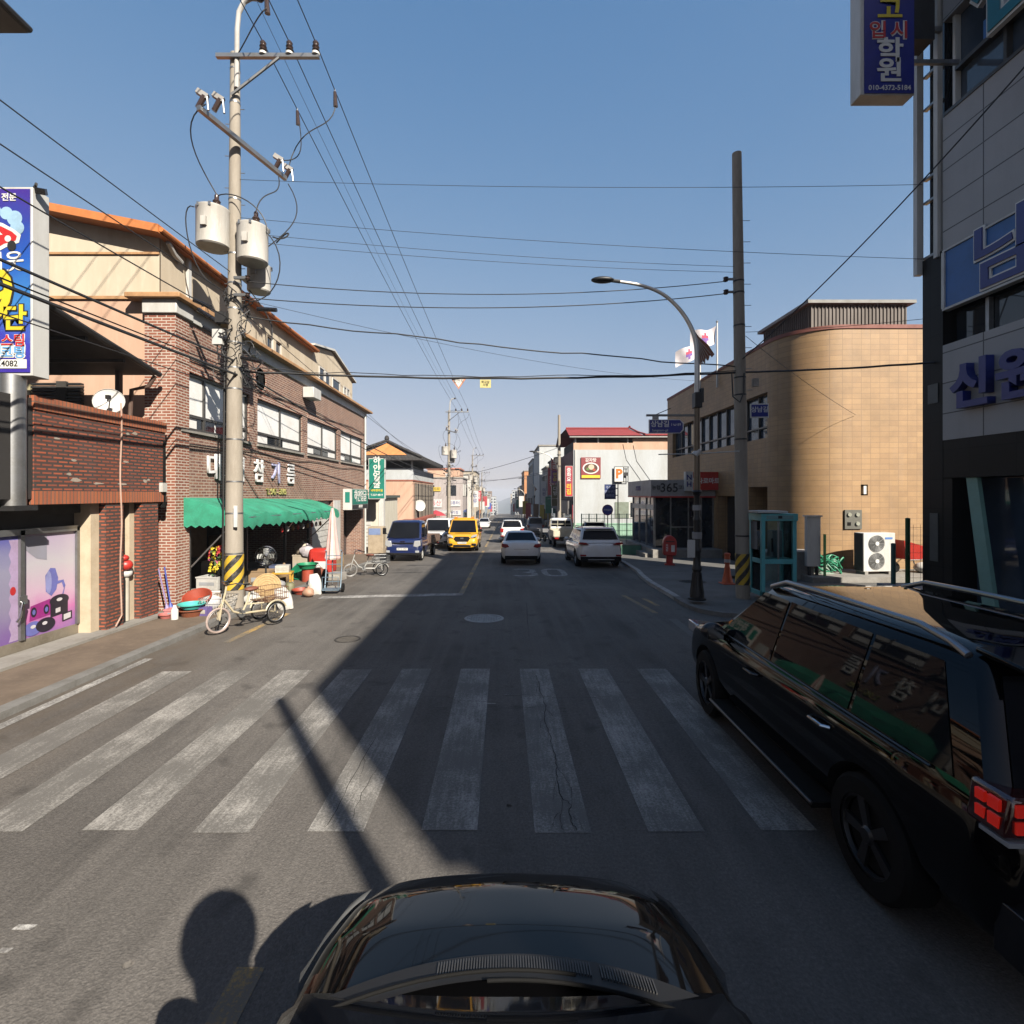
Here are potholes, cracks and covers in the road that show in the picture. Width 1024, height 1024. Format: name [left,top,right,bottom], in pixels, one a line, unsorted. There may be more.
crack [430,676,614,830]
manhole cover [464,614,504,623]
crack [324,739,379,828]
